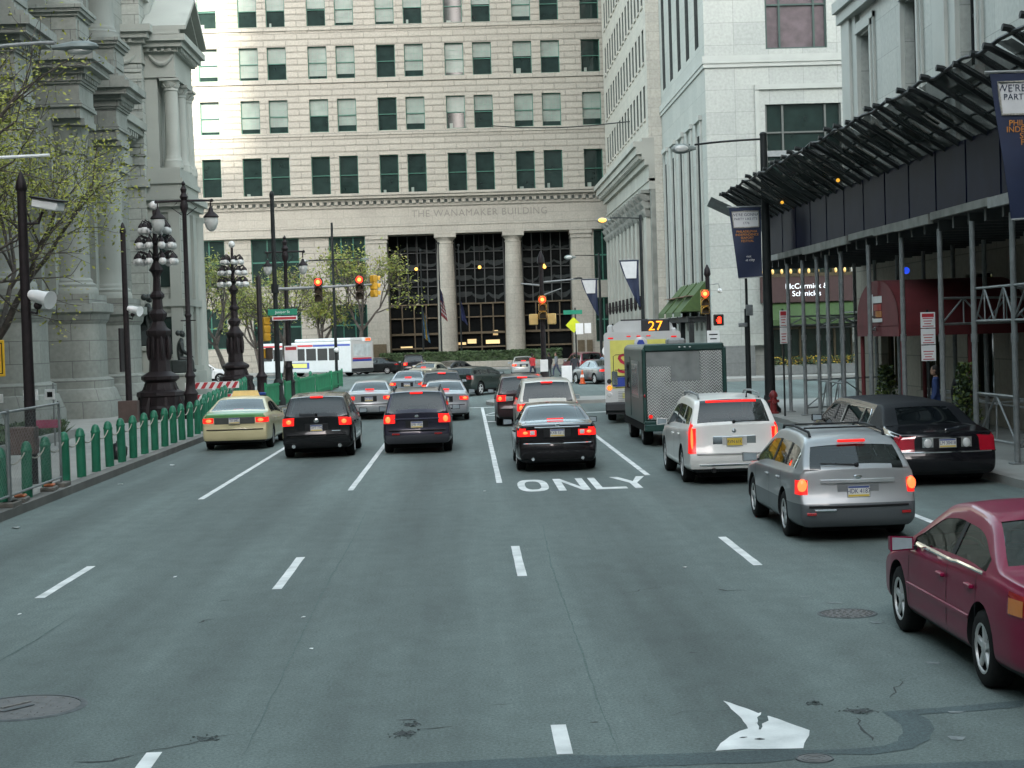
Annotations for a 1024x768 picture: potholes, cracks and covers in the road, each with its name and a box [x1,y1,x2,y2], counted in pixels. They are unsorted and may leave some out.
manhole cover [796,753,834,764]
manhole cover [0,694,88,722]
crack [87,734,233,763]
manhole cover [817,608,878,619]
